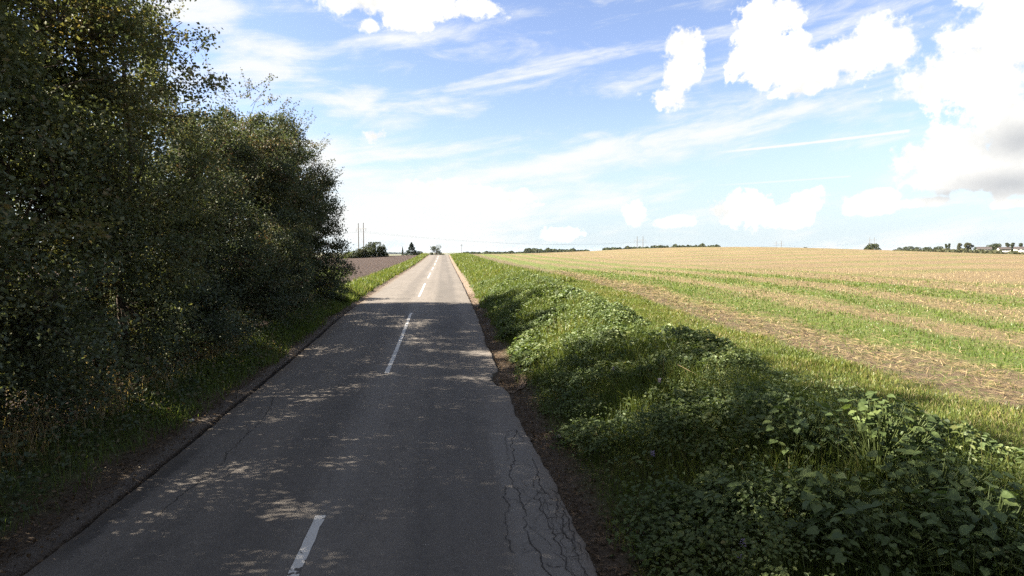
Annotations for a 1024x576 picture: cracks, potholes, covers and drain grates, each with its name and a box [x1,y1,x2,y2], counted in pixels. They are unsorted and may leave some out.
crack [503,430,588,576]
